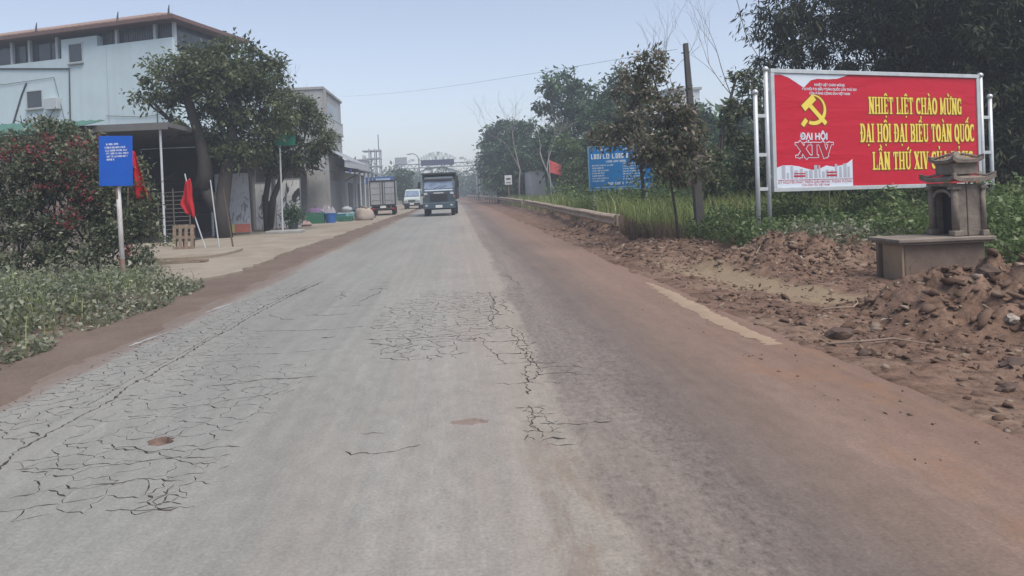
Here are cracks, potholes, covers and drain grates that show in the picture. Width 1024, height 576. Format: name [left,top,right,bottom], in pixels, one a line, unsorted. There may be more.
crack [0,274,612,522]
